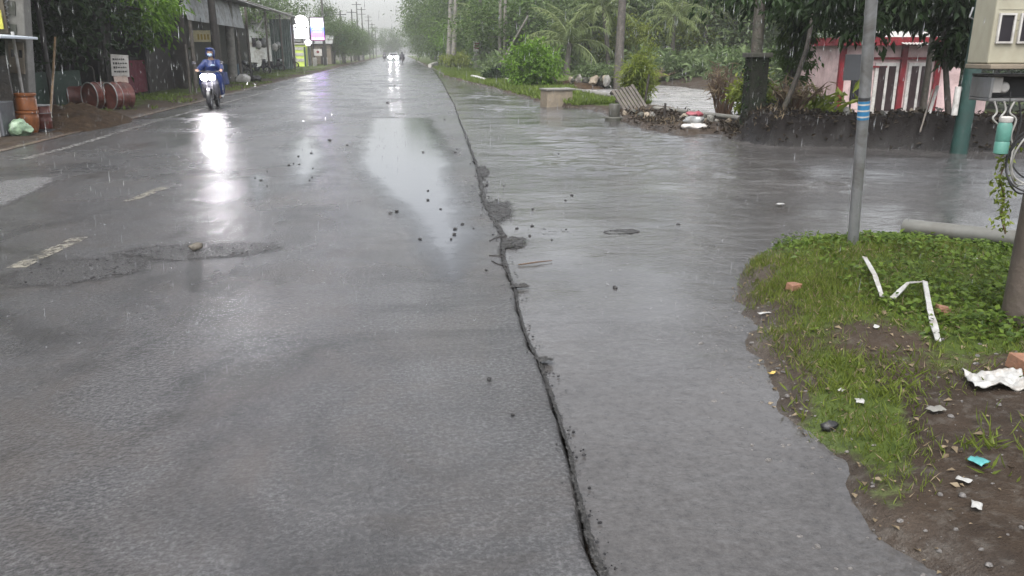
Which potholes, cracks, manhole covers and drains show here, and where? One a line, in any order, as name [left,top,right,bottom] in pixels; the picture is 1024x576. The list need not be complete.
crack [455,107,610,576]
